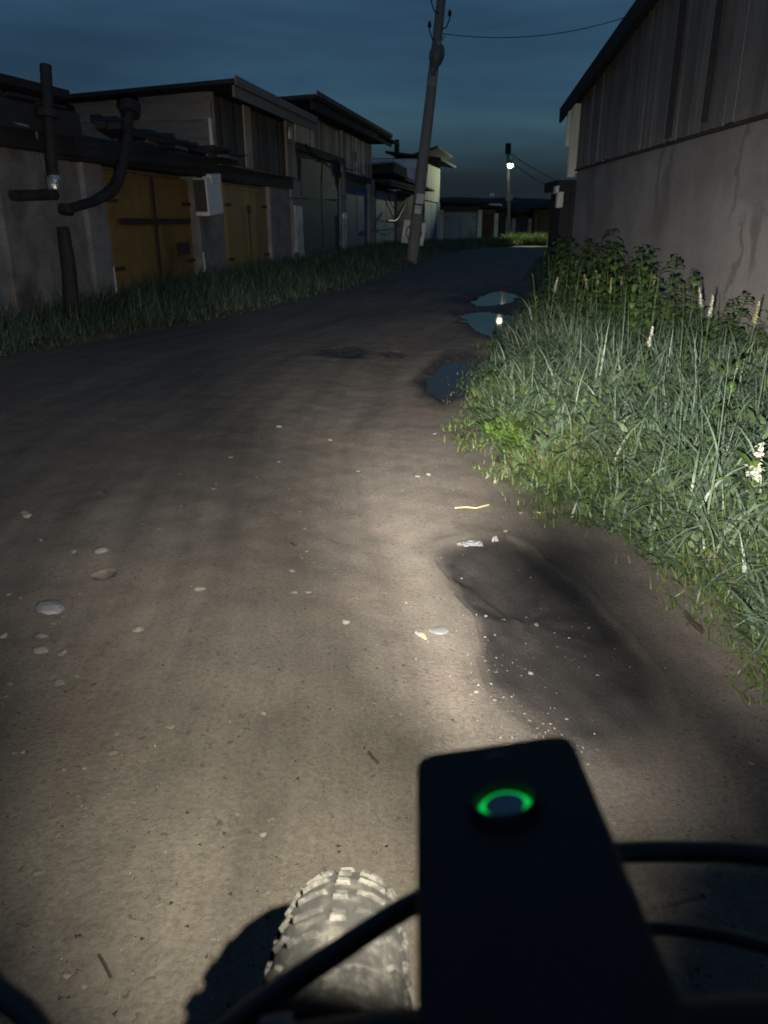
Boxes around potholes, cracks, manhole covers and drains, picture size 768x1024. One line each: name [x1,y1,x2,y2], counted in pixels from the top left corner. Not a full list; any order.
pothole [374,350,409,359]
pothole [413,354,483,404]
pothole [446,286,533,307]
pothole [312,346,373,359]
pothole [429,528,690,784]
pothole [450,307,525,338]
